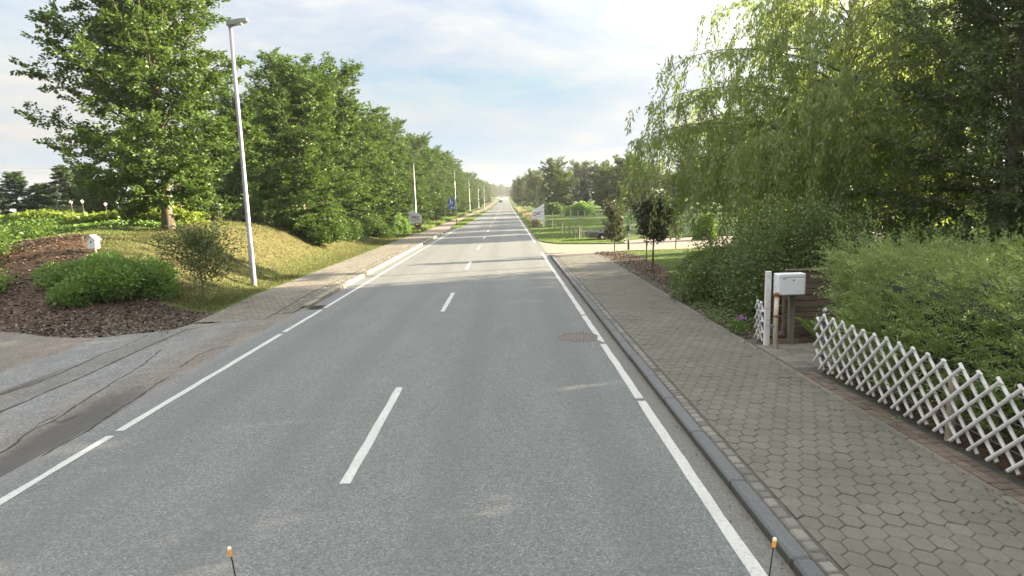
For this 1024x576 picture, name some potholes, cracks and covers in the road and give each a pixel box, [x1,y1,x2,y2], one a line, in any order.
crack [0,333,230,456]
manhole cover [558,332,602,342]
